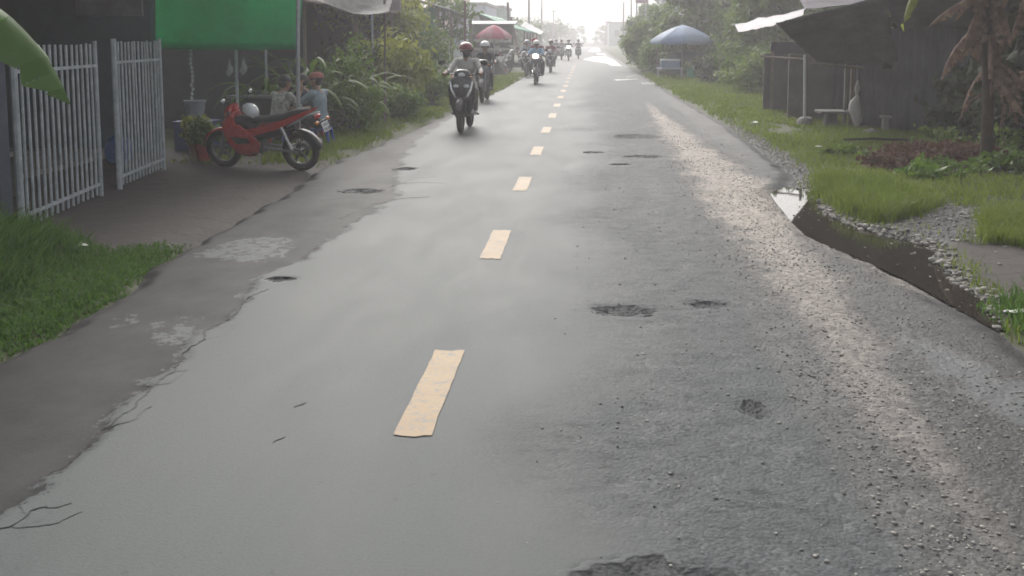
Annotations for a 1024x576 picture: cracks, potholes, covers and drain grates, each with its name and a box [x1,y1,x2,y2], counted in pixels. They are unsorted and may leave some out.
pothole [683,300,733,309]
pothole [736,397,772,419]
pothole [583,304,667,317]
pothole [555,549,749,576]
crack [0,503,81,537]
